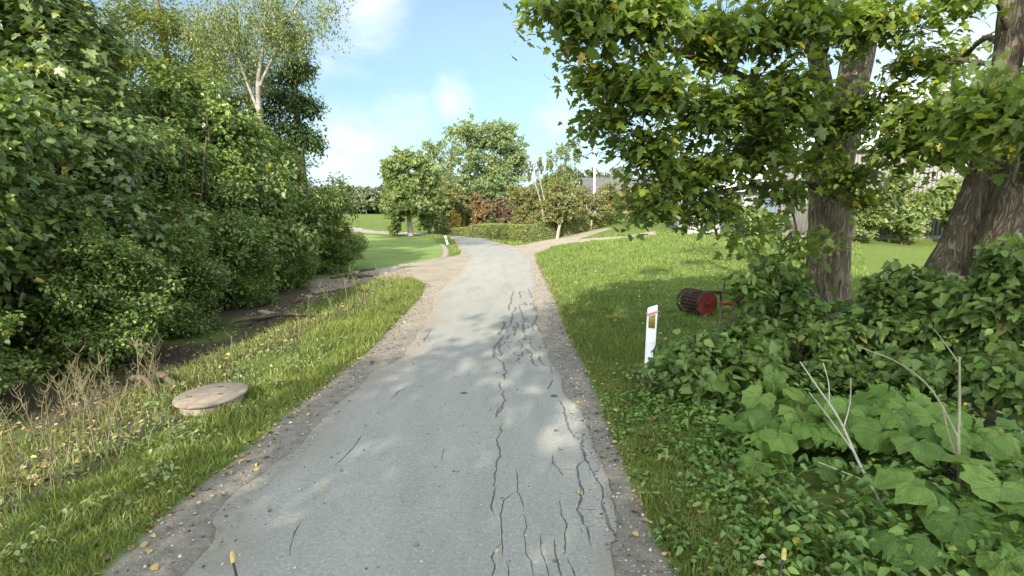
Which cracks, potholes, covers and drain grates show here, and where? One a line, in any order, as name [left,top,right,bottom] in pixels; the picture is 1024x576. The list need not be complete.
manhole cover [172,382,249,416]
crack [490,289,616,576]
